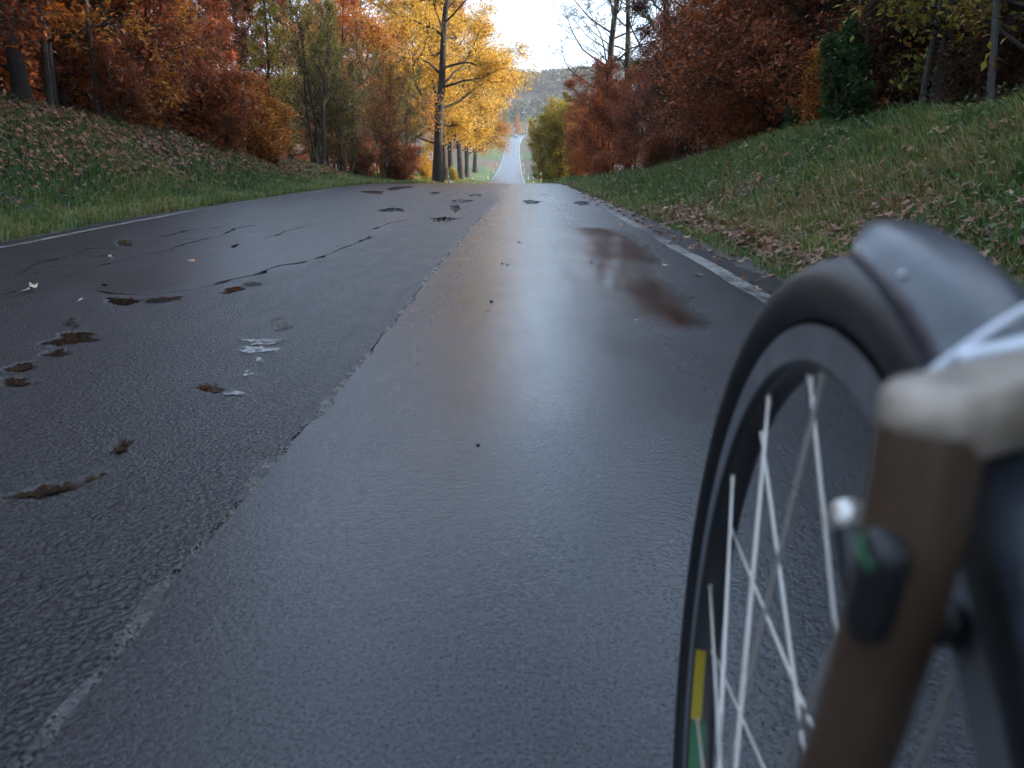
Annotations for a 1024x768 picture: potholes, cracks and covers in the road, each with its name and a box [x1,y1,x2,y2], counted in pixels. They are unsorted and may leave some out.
pothole [216,285,250,294]
pothole [0,360,39,373]
pothole [36,347,73,357]
pothole [103,296,143,306]
pothole [34,330,104,348]
pothole [0,469,116,502]
crack [1,216,352,295]
pothole [191,382,226,394]
pothole [107,436,135,461]
pothole [0,375,42,387]
